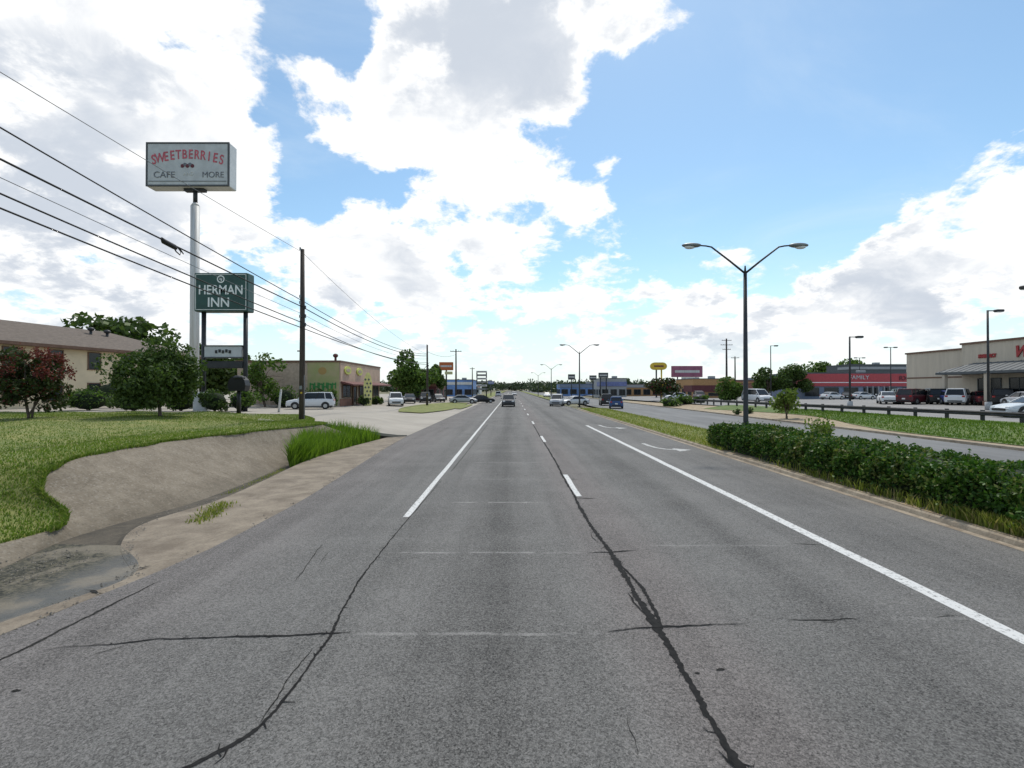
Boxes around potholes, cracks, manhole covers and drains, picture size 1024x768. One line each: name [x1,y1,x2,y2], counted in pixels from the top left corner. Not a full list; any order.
crack [600,623,742,633]
crack [46,484,438,768]
